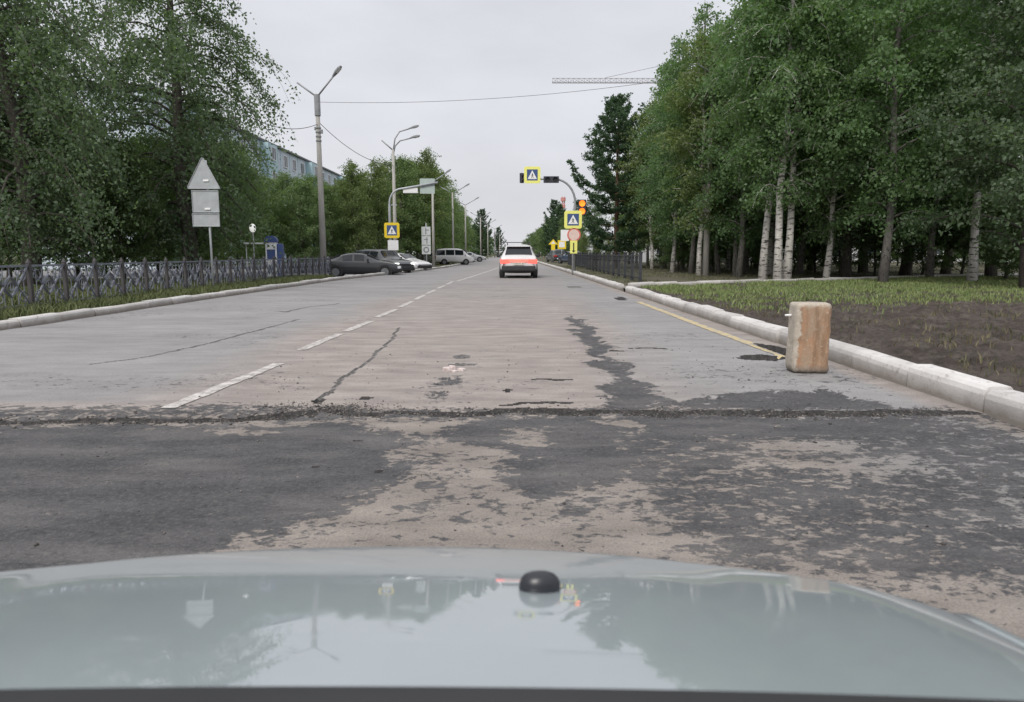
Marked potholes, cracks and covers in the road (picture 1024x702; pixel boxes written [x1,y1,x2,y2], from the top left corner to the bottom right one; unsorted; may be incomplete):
crack [88,303,339,365]
pothole [753,343,786,356]
pothole [423,389,457,398]
crack [317,327,401,401]
pothole [426,376,473,386]
